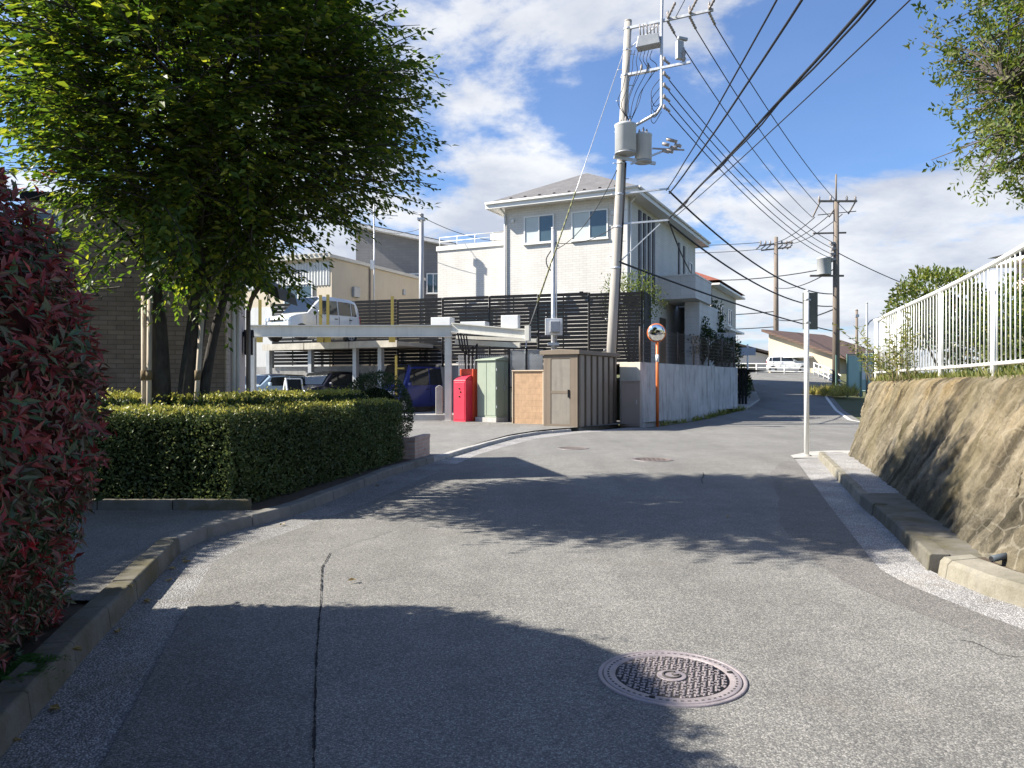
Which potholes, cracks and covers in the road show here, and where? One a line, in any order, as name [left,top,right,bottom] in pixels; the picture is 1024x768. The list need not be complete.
crack [312,553,330,768]
manhole cover [598,650,748,708]
